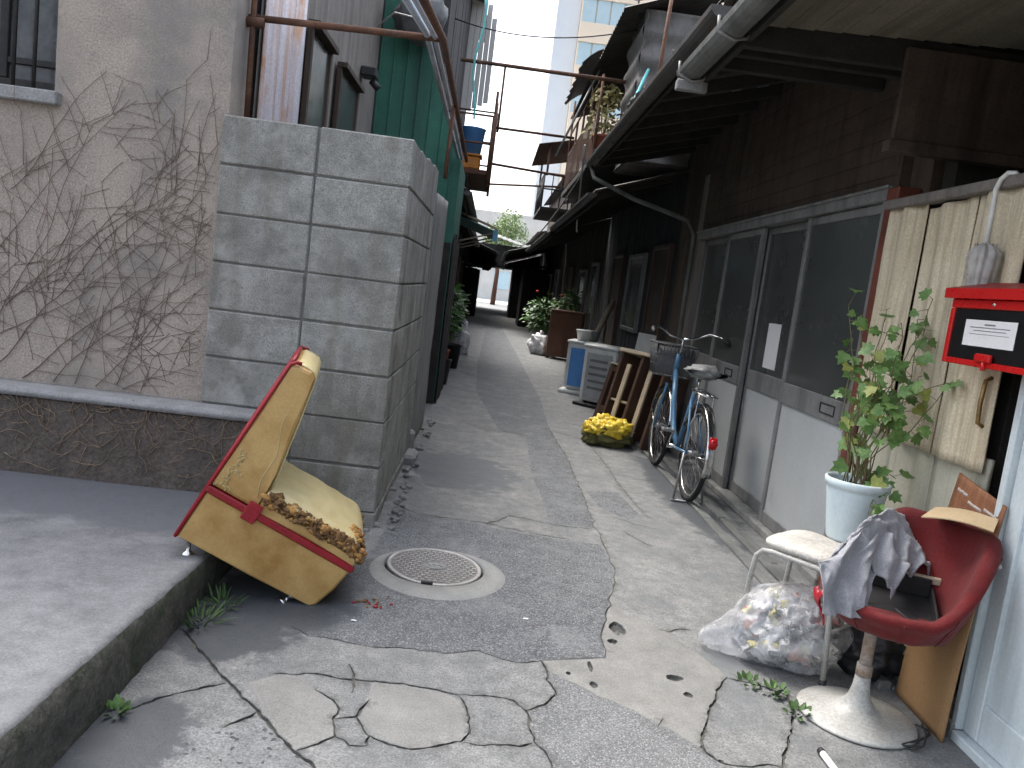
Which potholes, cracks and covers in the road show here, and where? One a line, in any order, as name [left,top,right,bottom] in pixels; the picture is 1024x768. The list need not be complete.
crack [274,430,650,768]
manhole cover [369,548,505,600]
crack [700,677,796,768]
pothole [608,622,626,636]
